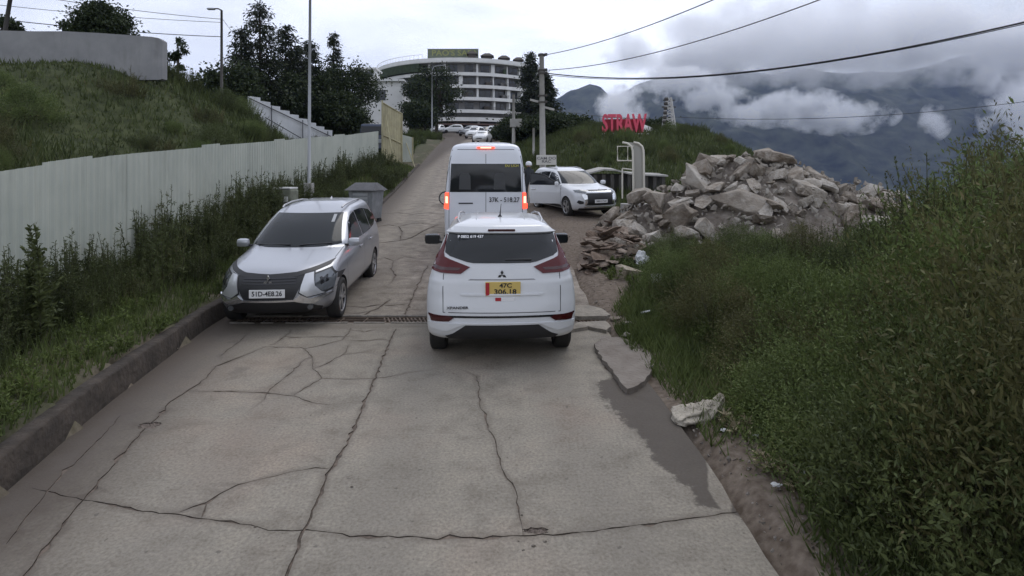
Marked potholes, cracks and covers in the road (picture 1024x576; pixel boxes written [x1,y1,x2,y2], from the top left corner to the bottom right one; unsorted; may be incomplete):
drain grate [229,315,599,324]
pothole [523,527,549,535]
crack [11,302,735,576]
